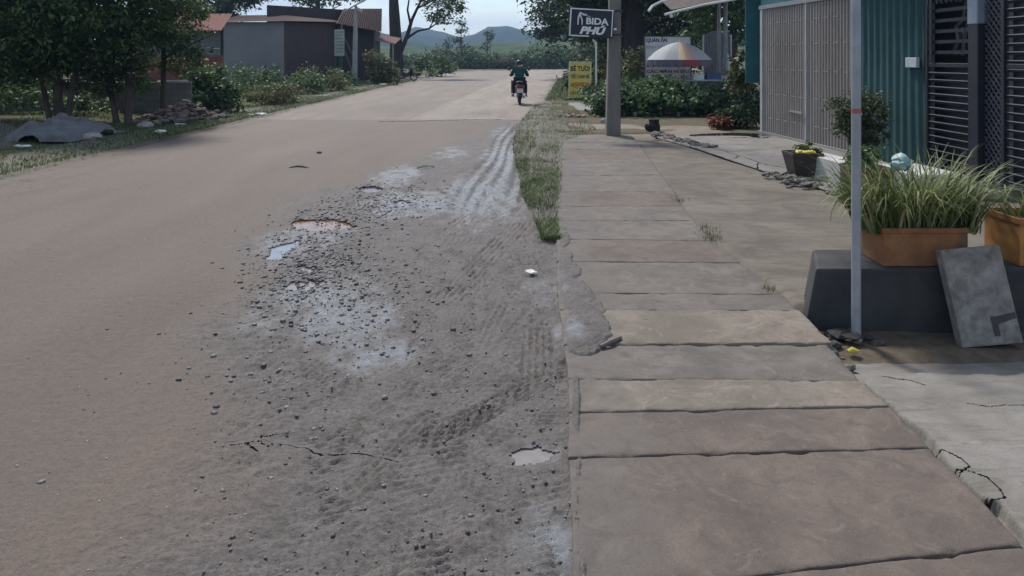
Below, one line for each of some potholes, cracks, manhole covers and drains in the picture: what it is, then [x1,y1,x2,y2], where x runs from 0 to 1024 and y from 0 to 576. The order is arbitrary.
pothole [358,185,387,193]
crack [936,449,1007,510]
pothole [291,217,358,231]
pothole [509,445,556,466]
pothole [262,240,301,259]
crack [224,433,399,462]
